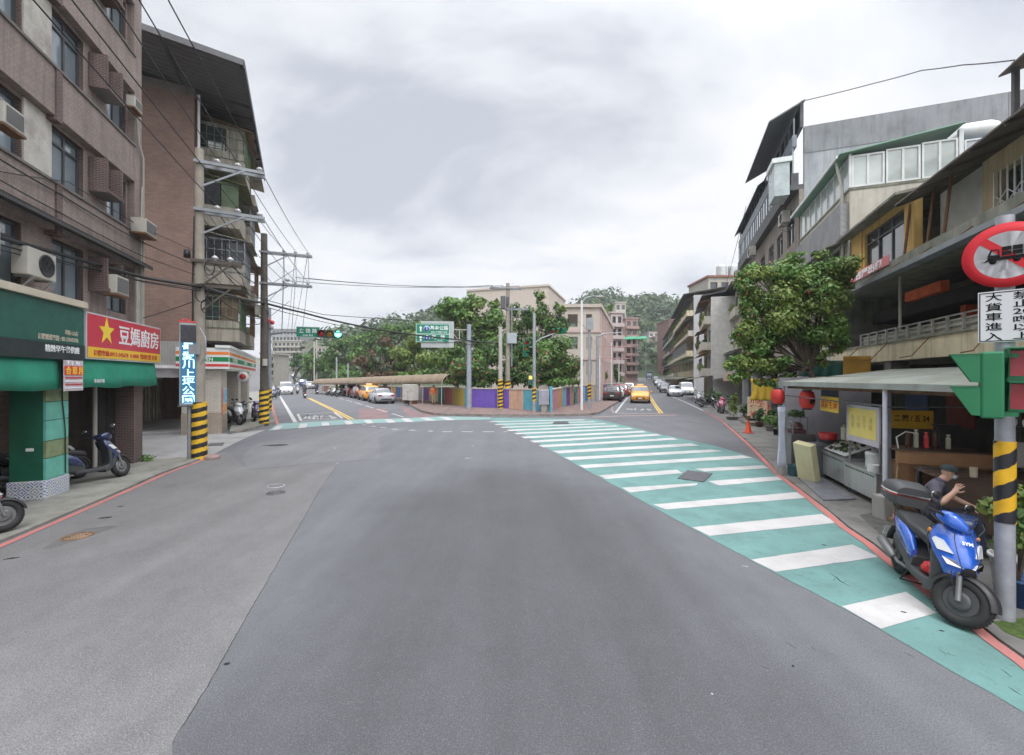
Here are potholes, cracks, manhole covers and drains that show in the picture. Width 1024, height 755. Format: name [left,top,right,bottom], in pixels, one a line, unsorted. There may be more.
manhole cover [60,532,95,541]
manhole cover [677,470,713,482]
